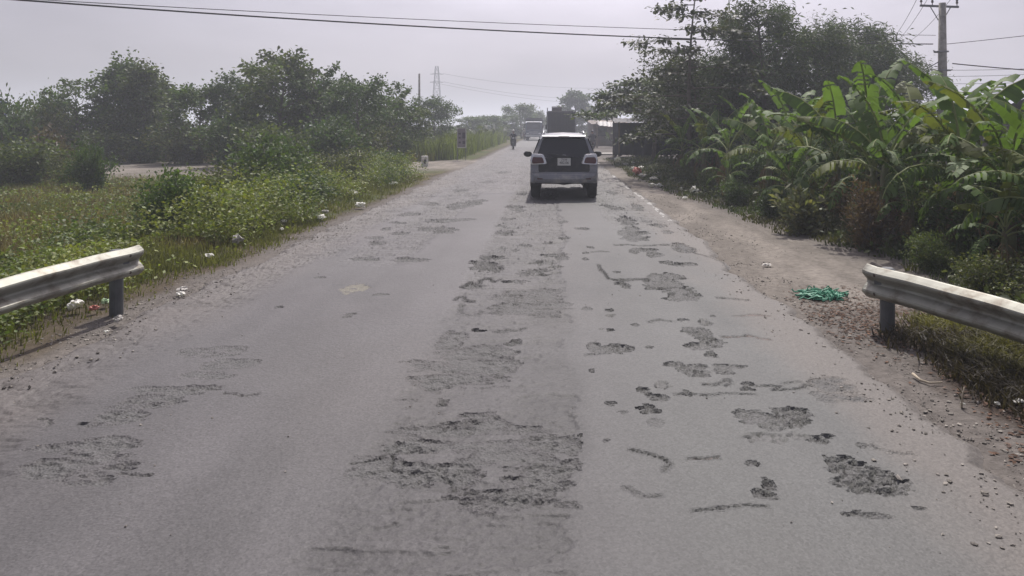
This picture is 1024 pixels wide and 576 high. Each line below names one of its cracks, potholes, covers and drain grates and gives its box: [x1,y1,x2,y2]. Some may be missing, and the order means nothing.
pothole [586,340,632,355]
pothole [822,455,917,497]
pothole [467,260,504,273]
pothole [503,339,523,347]
pothole [680,327,728,351]
pothole [731,406,817,431]
pothole [711,364,749,375]
pothole [750,477,781,500]
pothole [661,286,703,302]
pothole [663,361,712,378]
crack [619,448,723,499]
pothole [642,272,689,291]
